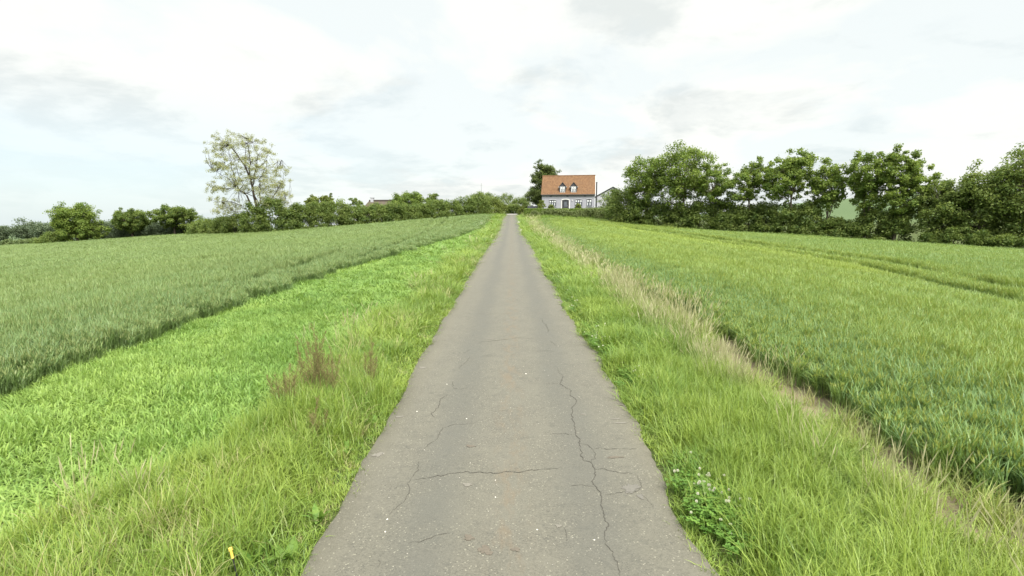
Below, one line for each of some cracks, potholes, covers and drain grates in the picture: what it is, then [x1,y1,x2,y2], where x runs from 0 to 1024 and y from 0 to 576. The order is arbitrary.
crack [552,372,648,573]
crack [395,382,552,509]
